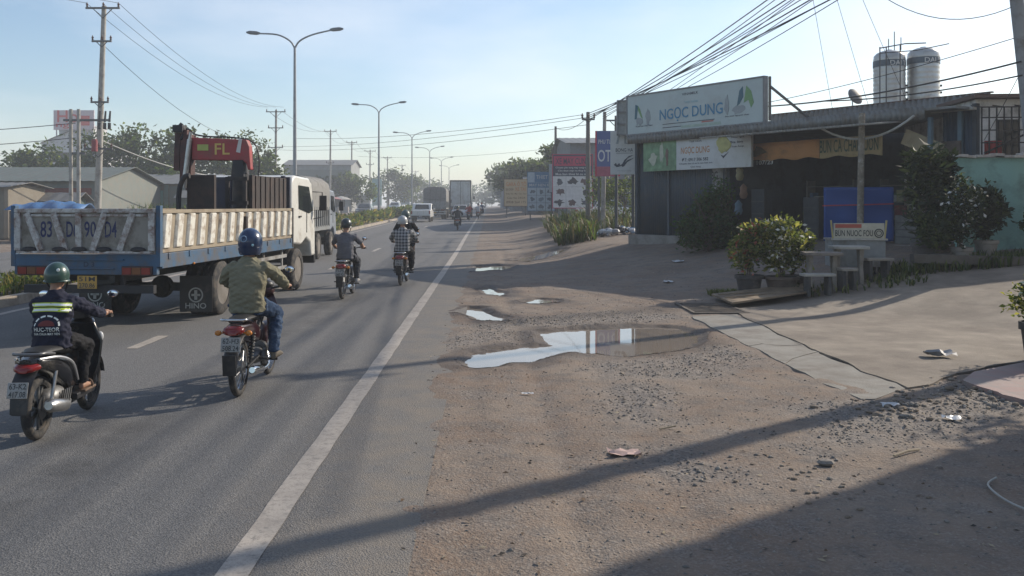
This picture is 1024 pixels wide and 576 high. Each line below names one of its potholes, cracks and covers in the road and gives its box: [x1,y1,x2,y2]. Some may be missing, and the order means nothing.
pothole [472,285,508,296]
pothole [454,323,709,368]
pothole [463,264,517,272]
pothole [448,305,514,322]
